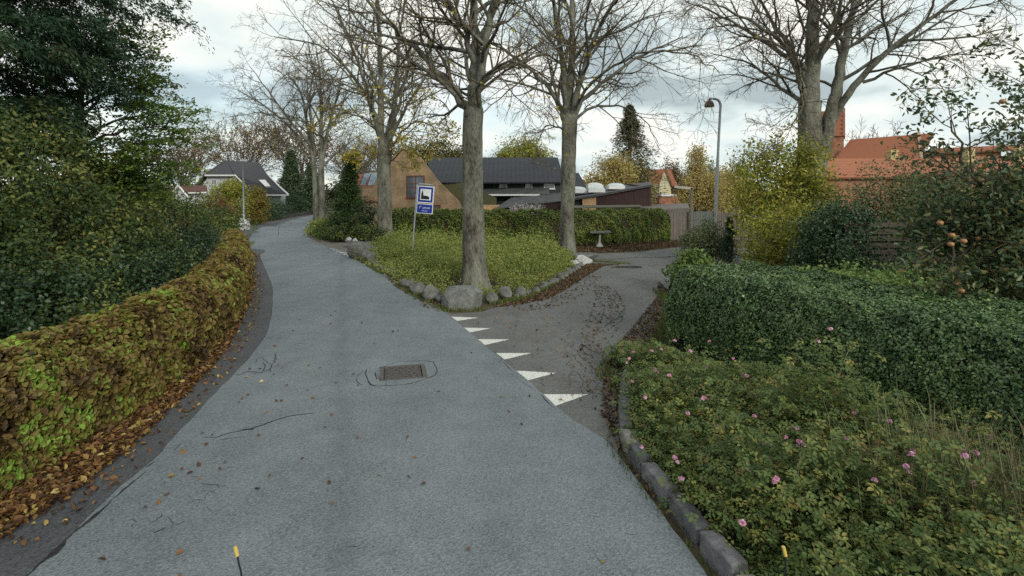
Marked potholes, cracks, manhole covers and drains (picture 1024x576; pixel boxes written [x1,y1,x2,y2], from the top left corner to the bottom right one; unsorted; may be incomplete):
crack [236,338,276,375]
crack [132,468,226,533]
crack [565,339,622,414]
crack [203,413,311,440]
crack [353,360,438,386]
